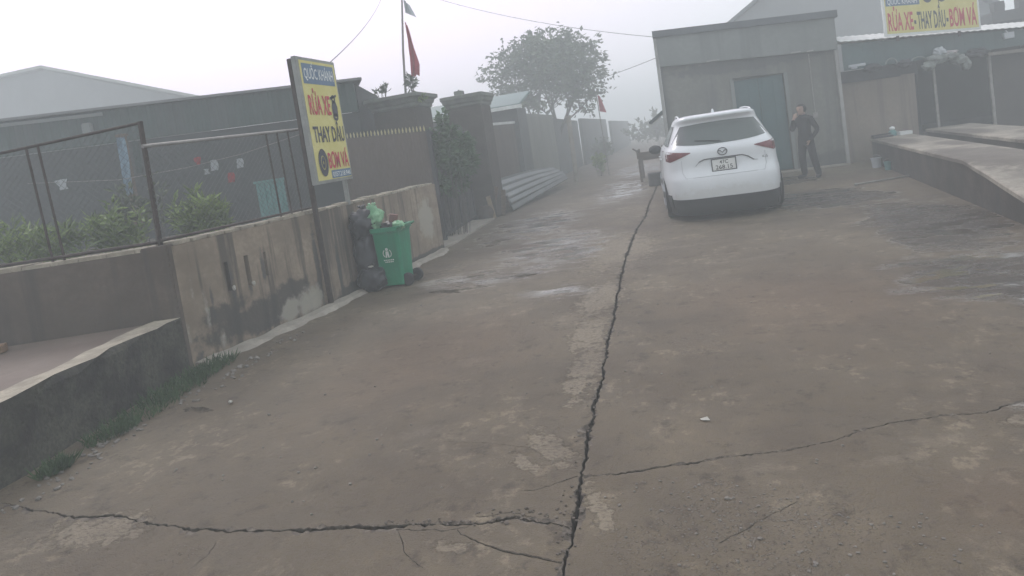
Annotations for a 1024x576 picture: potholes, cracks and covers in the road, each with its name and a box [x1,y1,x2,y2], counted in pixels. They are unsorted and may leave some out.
crack [1,186,1024,576]
